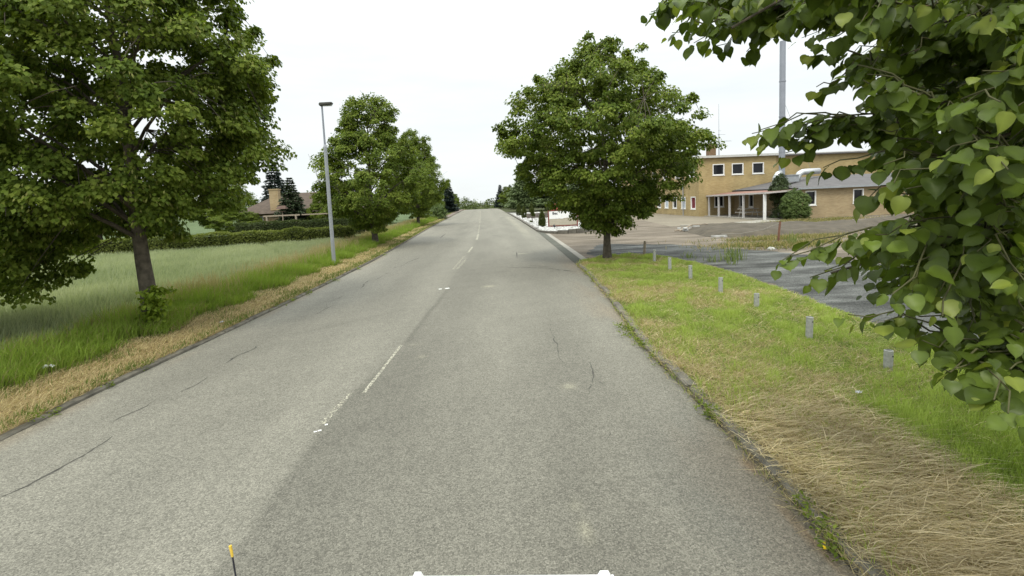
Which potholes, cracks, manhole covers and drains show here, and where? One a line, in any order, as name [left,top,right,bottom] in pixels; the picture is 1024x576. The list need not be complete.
crack [4,346,257,496]
